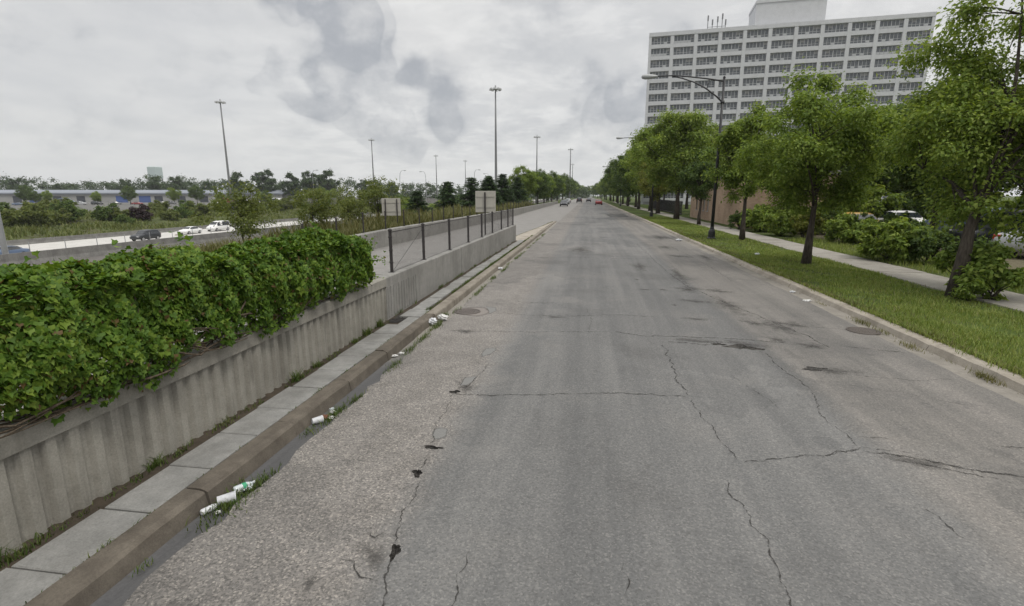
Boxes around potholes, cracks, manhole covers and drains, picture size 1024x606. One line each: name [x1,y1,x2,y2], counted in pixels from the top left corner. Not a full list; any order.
crack [349,560,390,606]
pothole [389,544,401,562]
manhole cover [846,327,881,335]
crack [452,342,1023,483]
crack [727,482,792,606]
